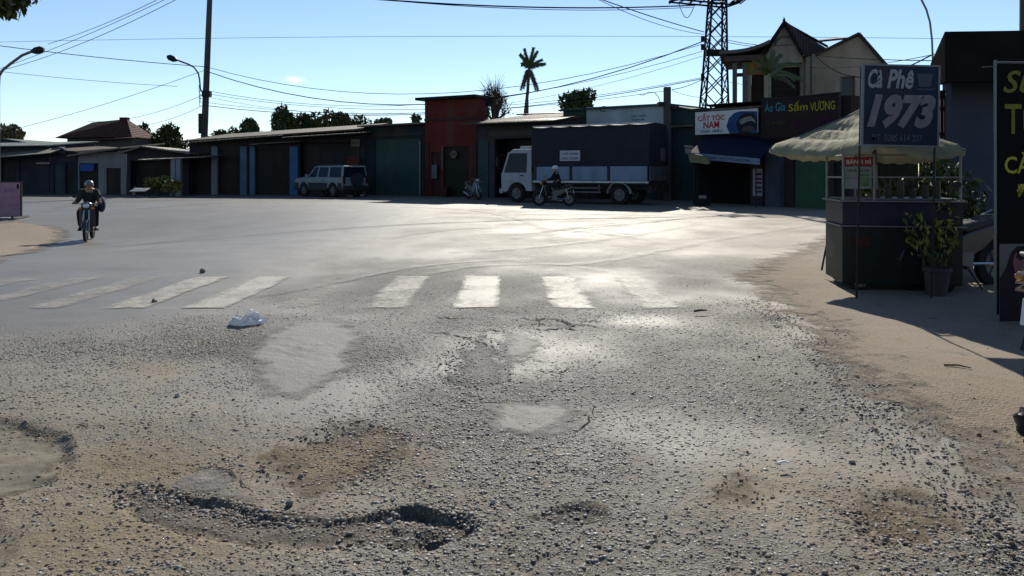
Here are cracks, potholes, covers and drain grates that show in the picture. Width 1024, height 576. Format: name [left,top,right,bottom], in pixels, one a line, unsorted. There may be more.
pothole [552,502,609,524]
pothole [871,490,956,543]
crack [426,316,602,350]
pothole [0,420,68,497]
pothole [259,427,407,495]
pothole [132,494,466,551]
